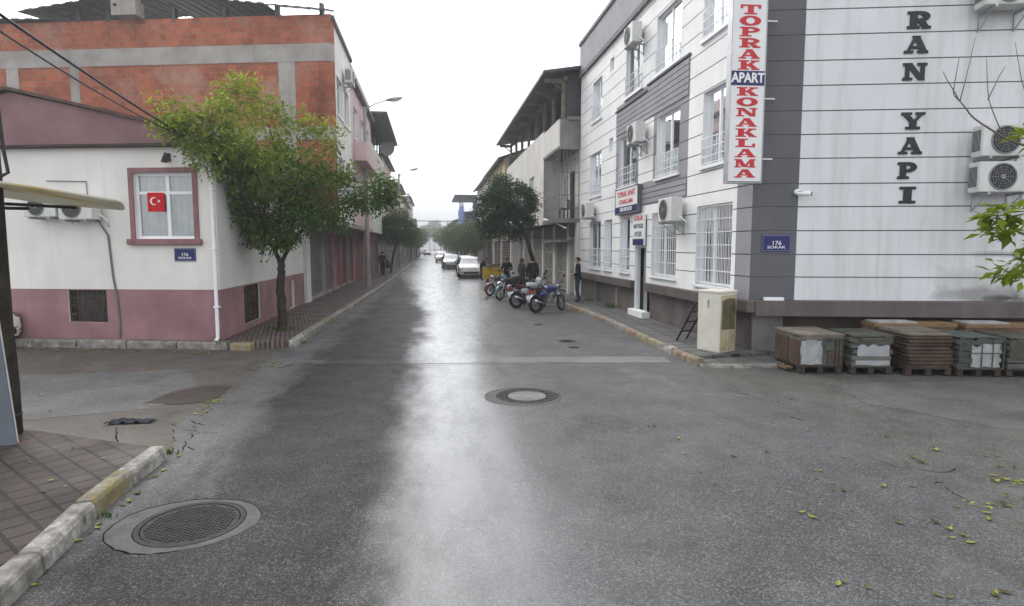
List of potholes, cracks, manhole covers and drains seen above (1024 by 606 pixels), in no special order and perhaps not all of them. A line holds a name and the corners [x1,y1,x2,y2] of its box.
manhole cover [485,388,561,406]
crack [874,459,968,501]
manhole cover [102,499,261,555]
crack [182,420,217,451]
